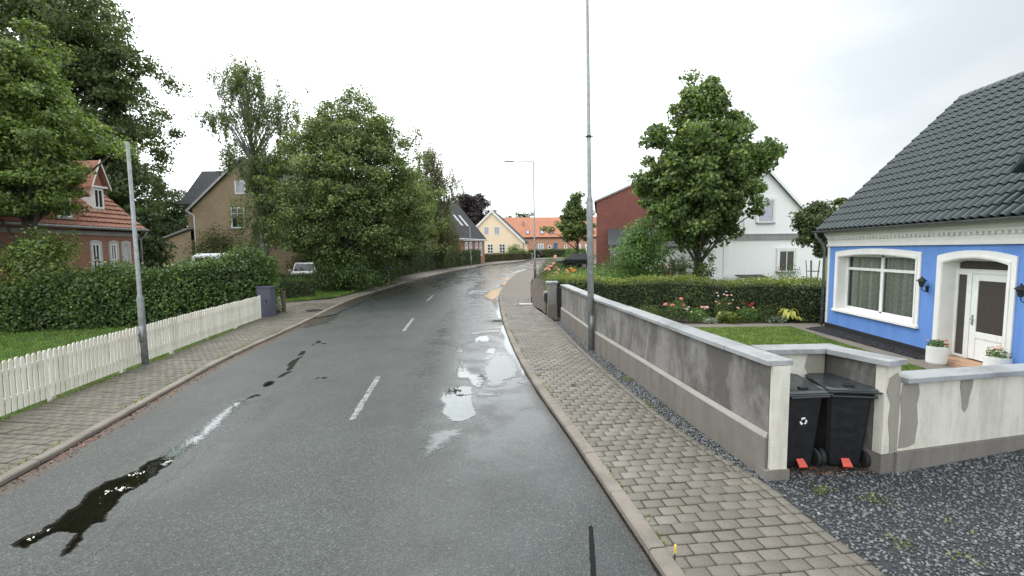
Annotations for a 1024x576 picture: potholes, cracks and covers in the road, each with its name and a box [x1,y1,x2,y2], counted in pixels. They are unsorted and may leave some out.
pothole [10,456,176,557]
